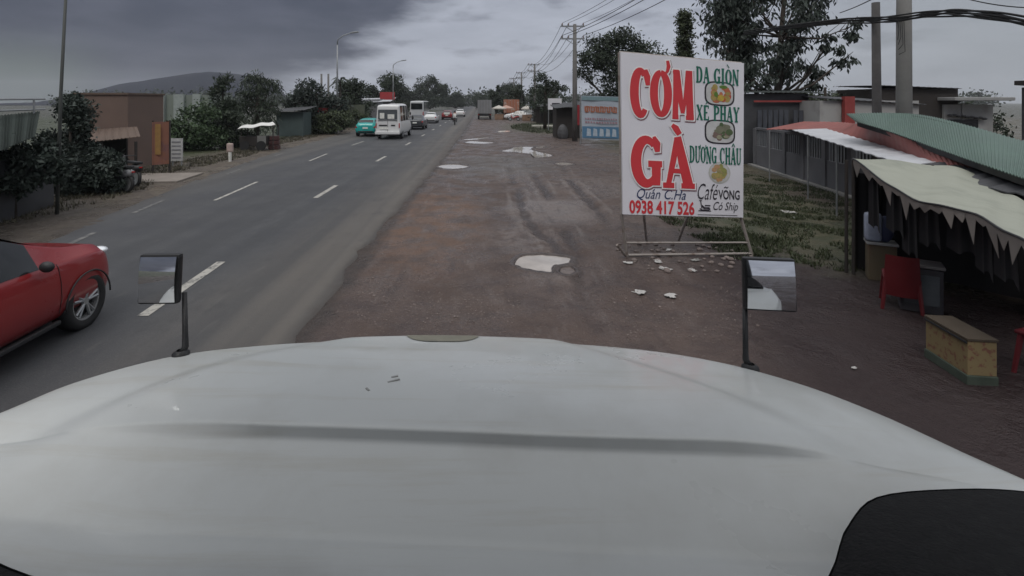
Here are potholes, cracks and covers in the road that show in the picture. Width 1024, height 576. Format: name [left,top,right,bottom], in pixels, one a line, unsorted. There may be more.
pothole [510,252,578,274]
pothole [500,146,553,158]
